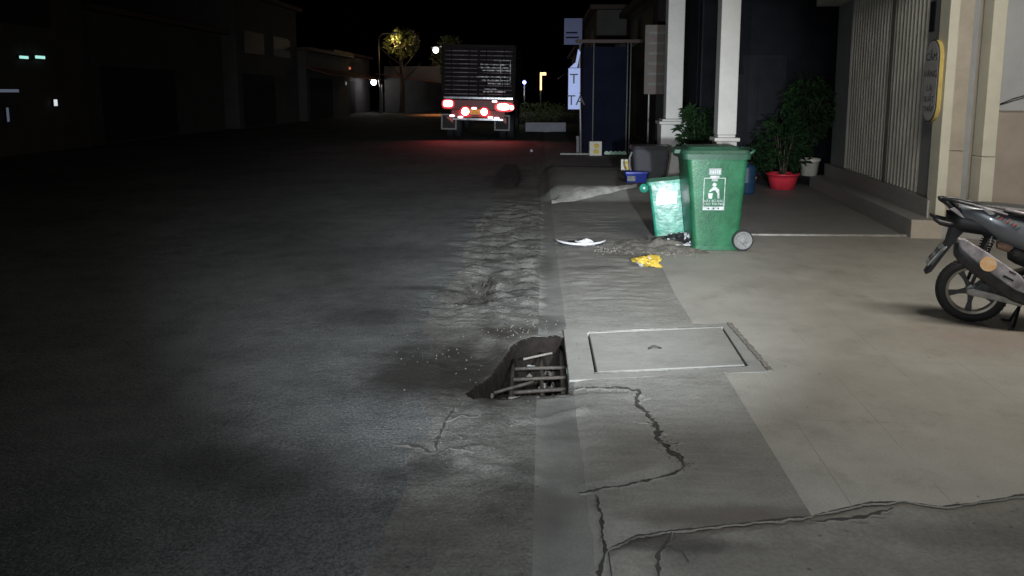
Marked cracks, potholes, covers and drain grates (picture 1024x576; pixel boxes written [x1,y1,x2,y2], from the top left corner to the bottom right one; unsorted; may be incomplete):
crack [393,401,496,457]
pothole [458,334,575,402]
crack [575,385,689,495]
manhole cover [563,322,773,382]
crack [606,494,1024,576]
